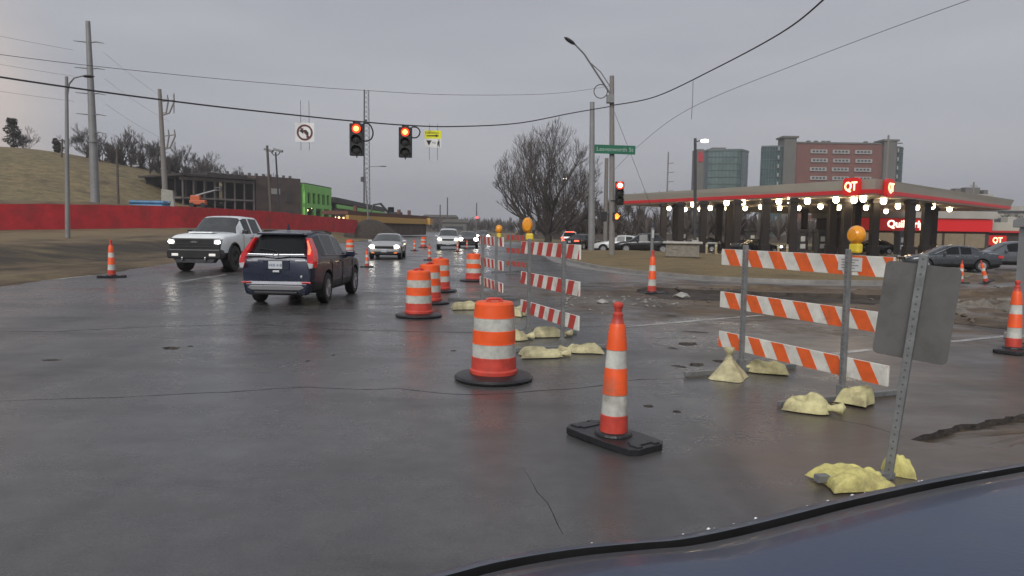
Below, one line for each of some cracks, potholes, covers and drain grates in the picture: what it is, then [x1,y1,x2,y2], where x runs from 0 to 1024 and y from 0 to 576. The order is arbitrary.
crack [524,470,563,534]
pothole [911,414,1024,449]
crack [15,378,683,401]
